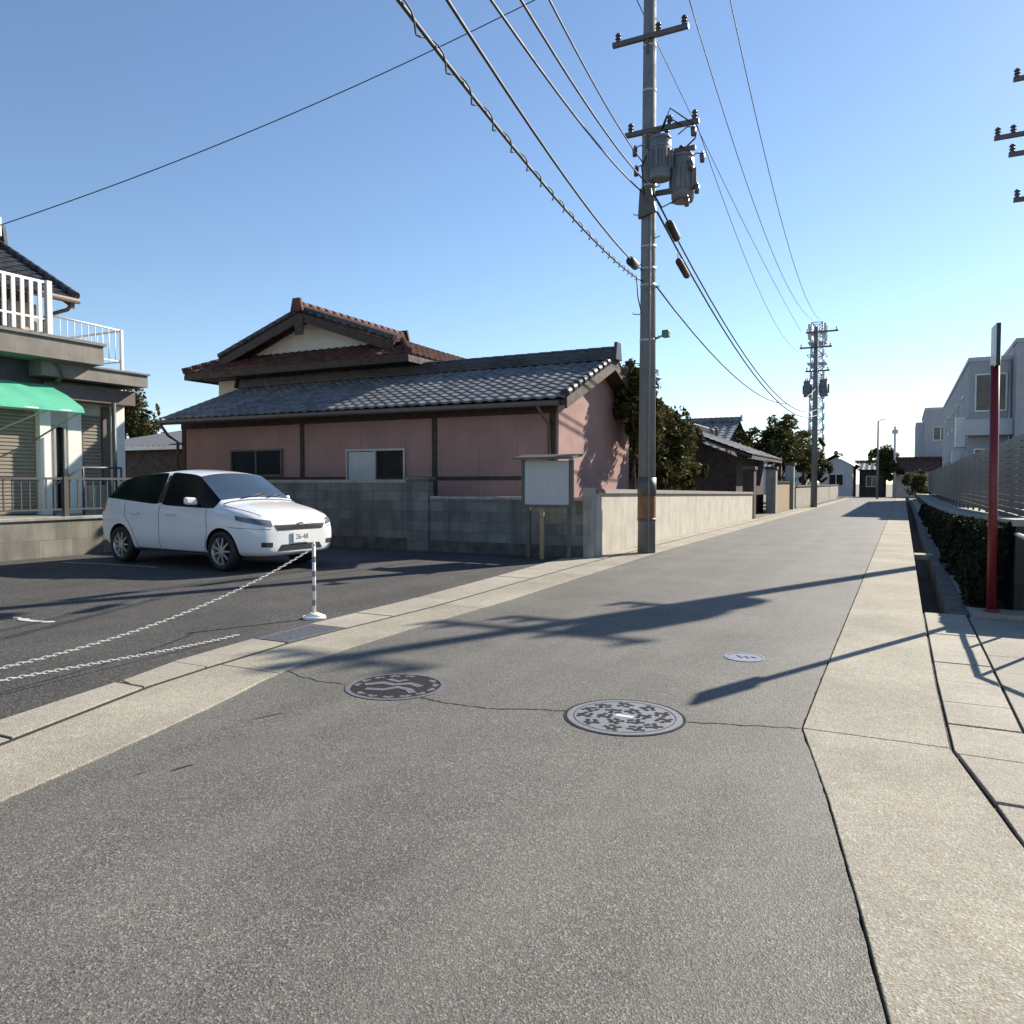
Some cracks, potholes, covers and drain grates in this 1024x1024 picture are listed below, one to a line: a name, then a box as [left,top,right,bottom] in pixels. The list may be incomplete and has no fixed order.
utility cover [724,653,766,662]
drain grate [256,624,345,643]
manhole cover [564,699,686,737]
manhole cover [345,673,446,700]
crack [420,697,566,711]
crack [686,721,804,729]
